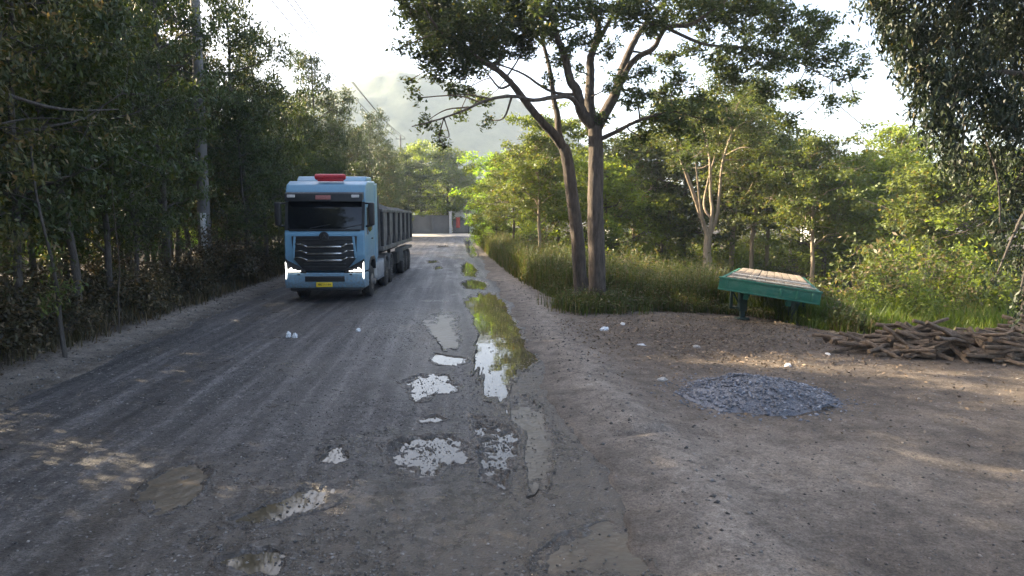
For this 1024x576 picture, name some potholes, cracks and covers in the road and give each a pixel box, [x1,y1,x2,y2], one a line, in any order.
pothole [396,372,465,403]
pothole [375,432,481,480]
pothole [524,518,662,576]
pothole [459,261,479,278]
pothole [459,278,490,290]
pothole [315,442,353,465]
pothole [221,479,355,529]
pothole [416,413,450,424]
pothole [463,291,542,418]
pothole [428,352,471,367]
pothole [207,544,298,576]
pothole [466,413,528,491]
